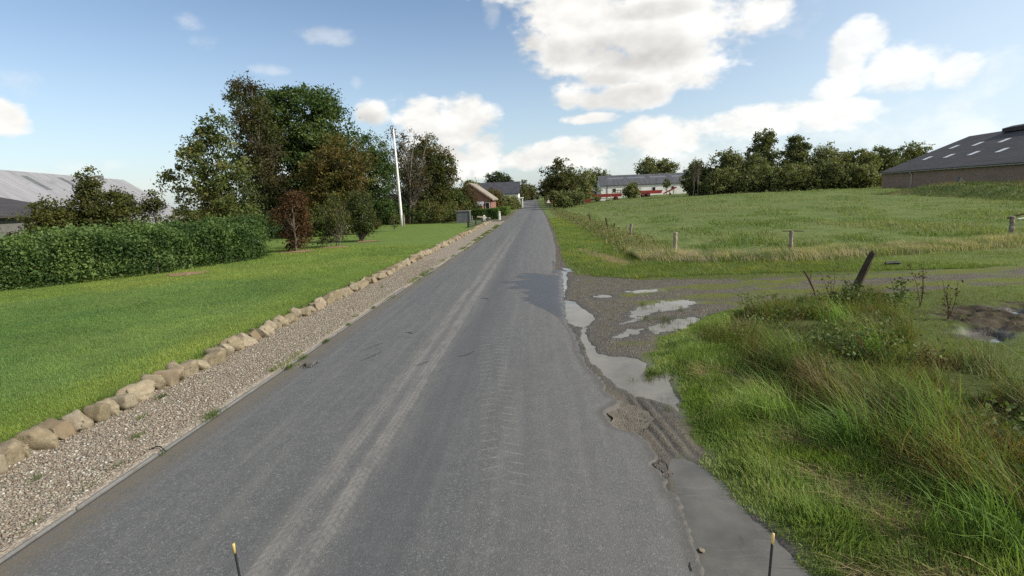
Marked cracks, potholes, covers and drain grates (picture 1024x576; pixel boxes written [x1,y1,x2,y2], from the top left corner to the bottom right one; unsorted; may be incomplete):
pothole [608,399,654,436]
